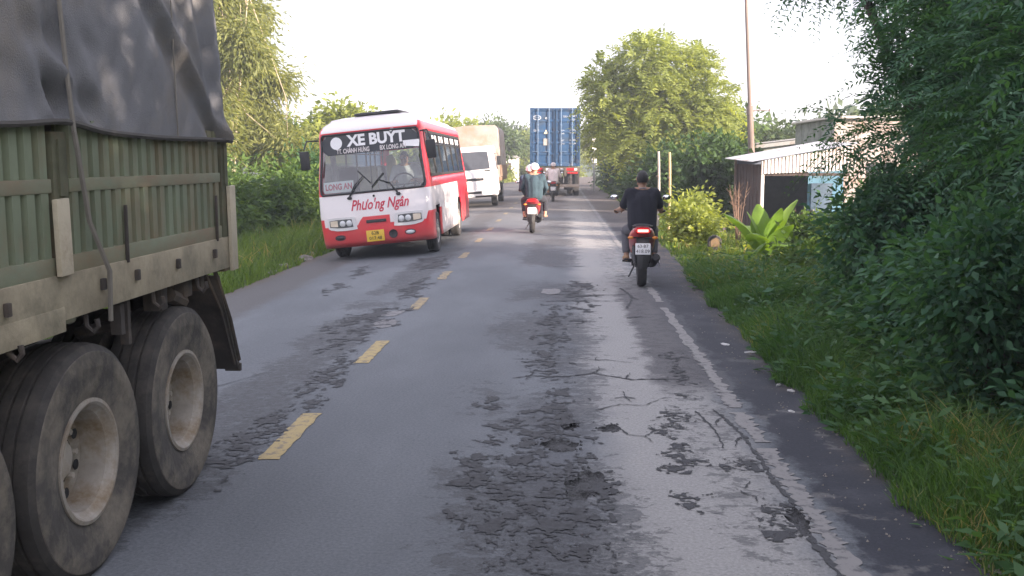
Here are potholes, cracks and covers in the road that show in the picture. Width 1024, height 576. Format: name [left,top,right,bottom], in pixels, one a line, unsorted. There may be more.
crack [435,266,842,576]
crack [203,255,453,492]
pothole [562,466,612,501]
